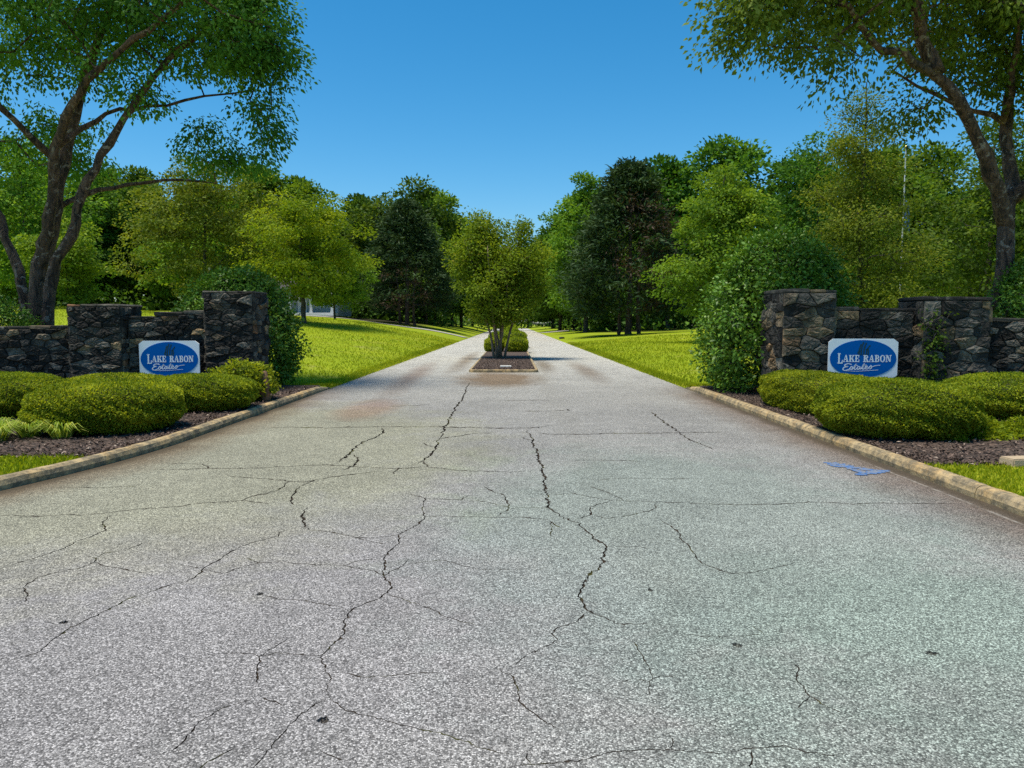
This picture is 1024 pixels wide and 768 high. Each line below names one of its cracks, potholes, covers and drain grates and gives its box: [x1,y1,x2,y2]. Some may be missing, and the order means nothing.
crack [0,385,962,768]
